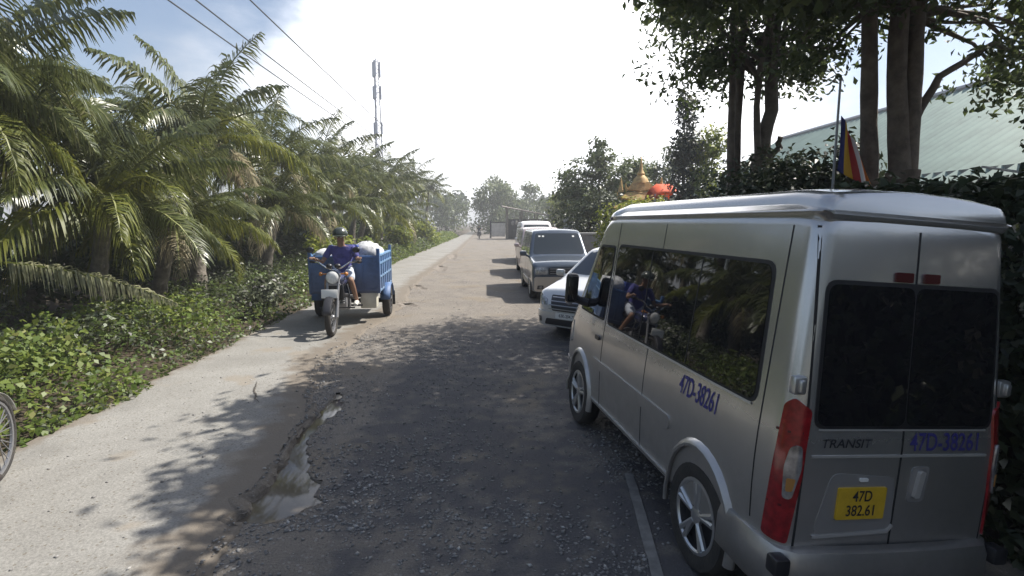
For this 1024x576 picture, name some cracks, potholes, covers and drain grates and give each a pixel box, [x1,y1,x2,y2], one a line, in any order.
pothole [217,392,345,526]
